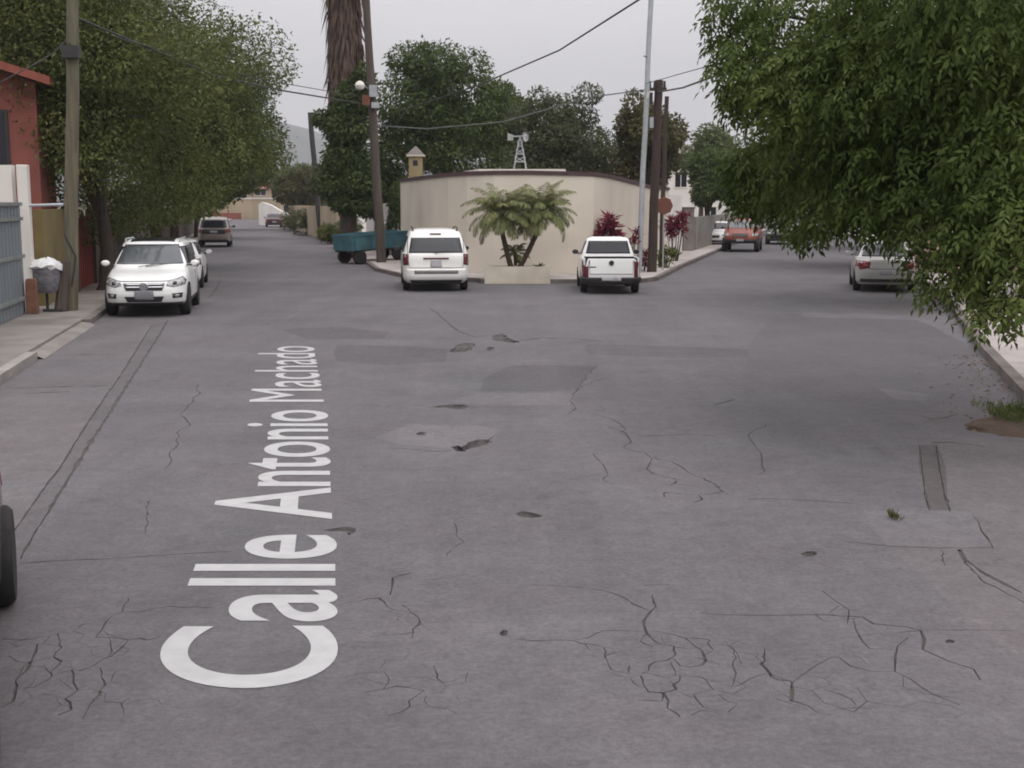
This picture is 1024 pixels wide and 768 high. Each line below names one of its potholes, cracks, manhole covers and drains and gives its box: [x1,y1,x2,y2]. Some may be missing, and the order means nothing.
crack [568,367,622,414]
pothole [326,526,357,535]
crack [15,320,201,559]
crack [339,572,468,716]
crack [594,414,724,503]
crack [2,598,213,719]
pothole [449,343,475,352]
crack [515,584,966,717]
pothole [492,334,519,343]
pothole [451,439,492,451]
